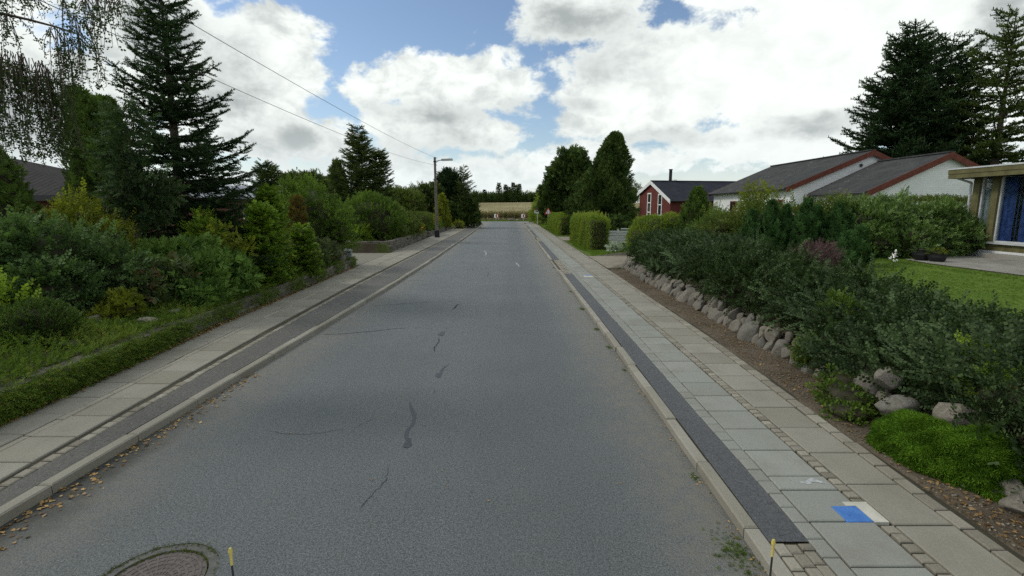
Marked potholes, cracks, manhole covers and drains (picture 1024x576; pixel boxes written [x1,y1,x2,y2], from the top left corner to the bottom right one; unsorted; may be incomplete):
manhole cover [103,541,224,576]
